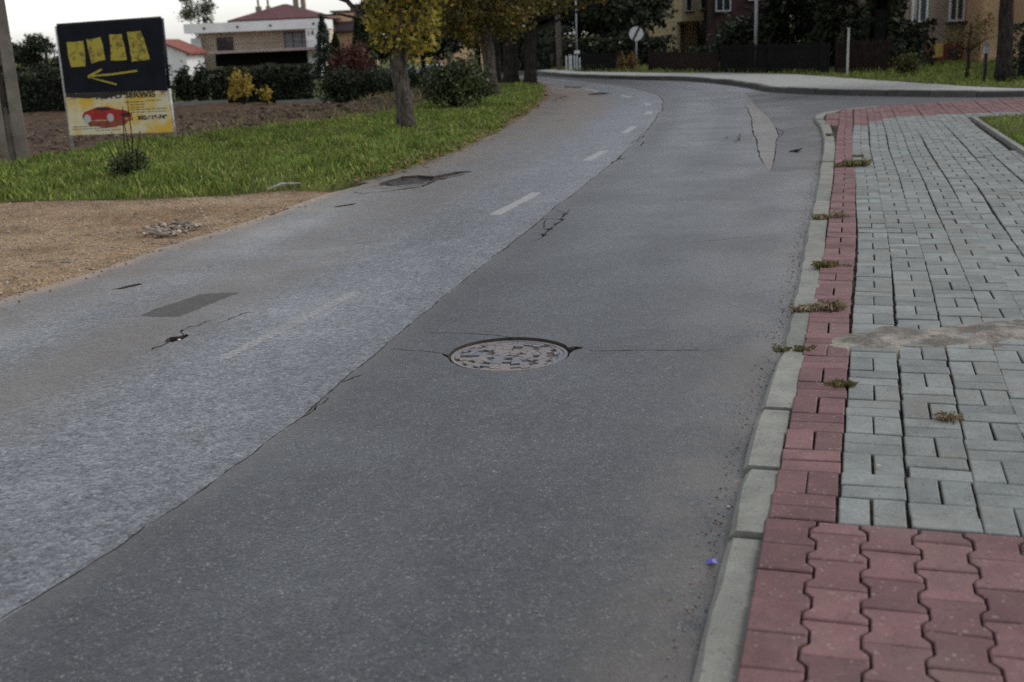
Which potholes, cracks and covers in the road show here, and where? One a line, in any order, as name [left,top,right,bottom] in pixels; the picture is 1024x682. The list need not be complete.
manhole cover [447,337,571,371]
pothole [354,171,472,193]
crack [535,210,570,239]
crack [180,312,249,336]
